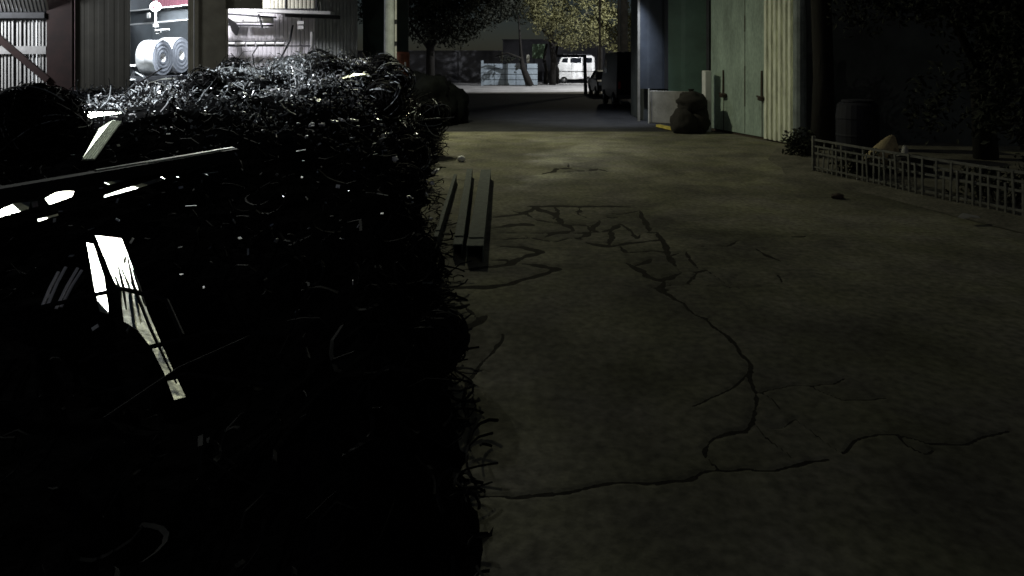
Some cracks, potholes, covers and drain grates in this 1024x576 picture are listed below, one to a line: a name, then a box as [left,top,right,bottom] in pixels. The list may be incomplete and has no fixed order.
crack [542,164,610,175]
crack [442,205,1009,499]
